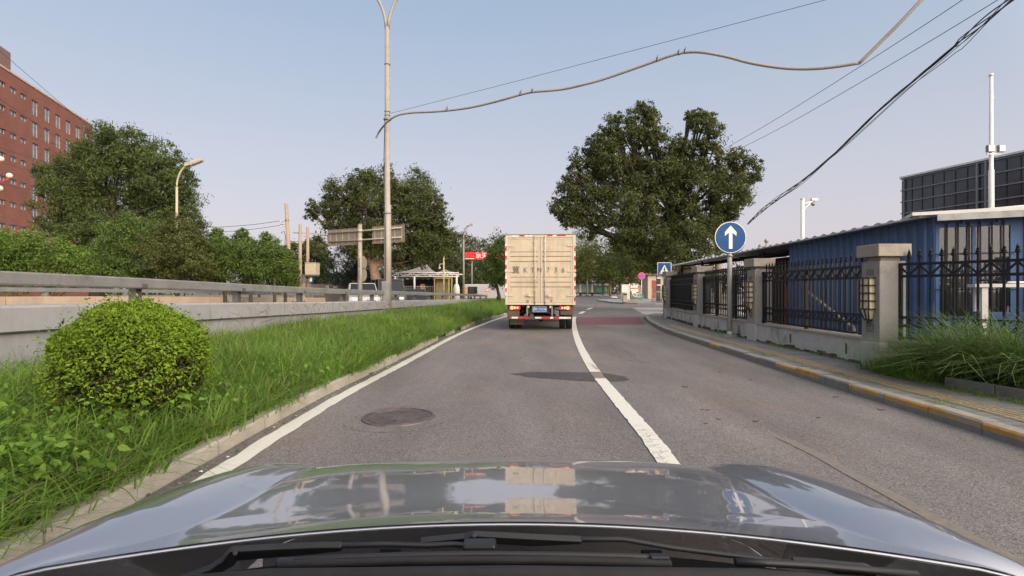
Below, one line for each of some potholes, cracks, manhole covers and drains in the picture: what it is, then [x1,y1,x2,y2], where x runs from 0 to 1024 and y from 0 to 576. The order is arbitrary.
manhole cover [361,408,435,427]
